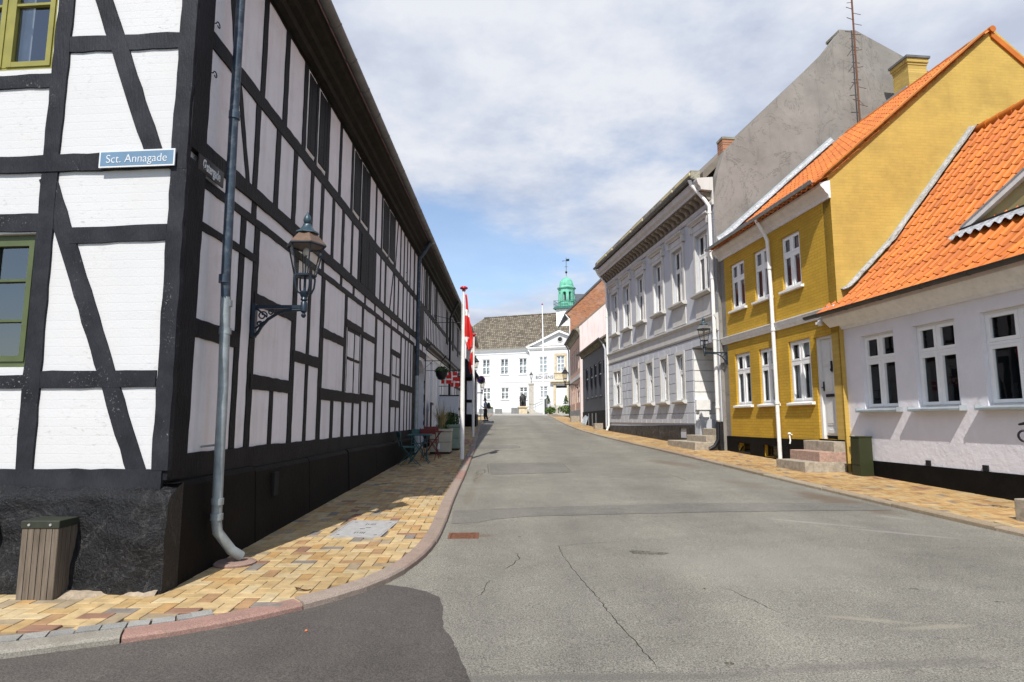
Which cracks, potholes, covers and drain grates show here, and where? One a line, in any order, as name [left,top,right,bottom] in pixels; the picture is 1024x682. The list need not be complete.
manhole cover [327,520,398,539]
crack [559,541,657,668]
